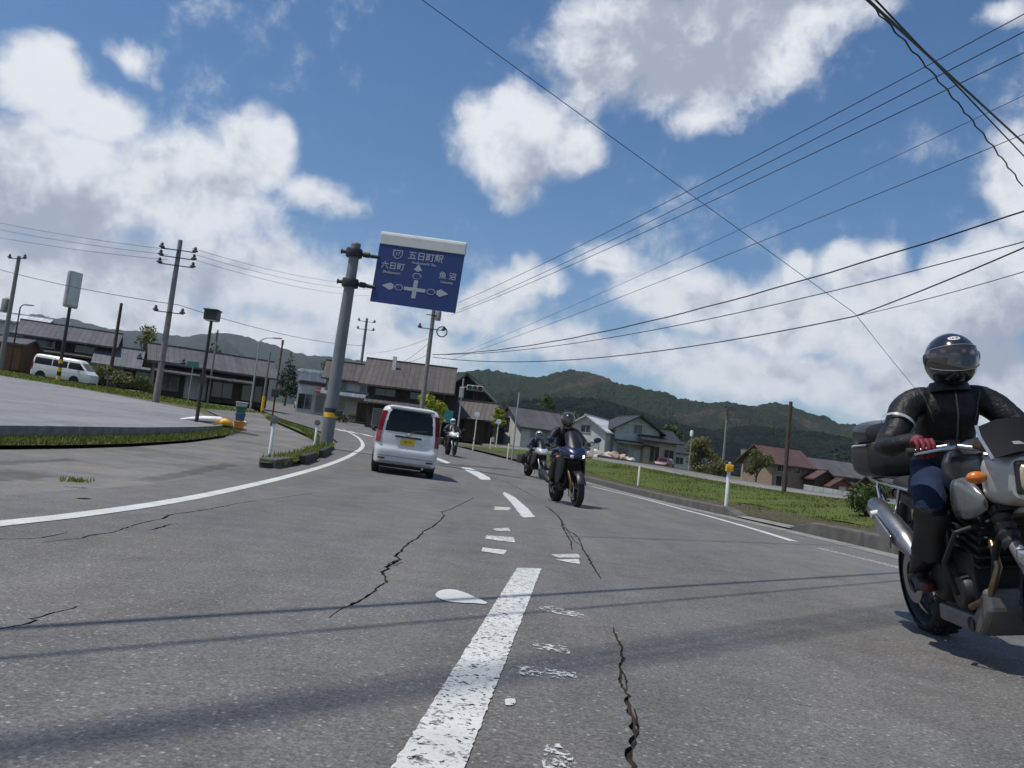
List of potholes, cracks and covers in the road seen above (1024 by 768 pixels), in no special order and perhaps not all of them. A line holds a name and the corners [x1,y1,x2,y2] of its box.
crack [491,477,601,579]
crack [28,501,252,543]
crack [613,627,639,768]
crack [0,606,76,629]
crack [329,498,473,618]
